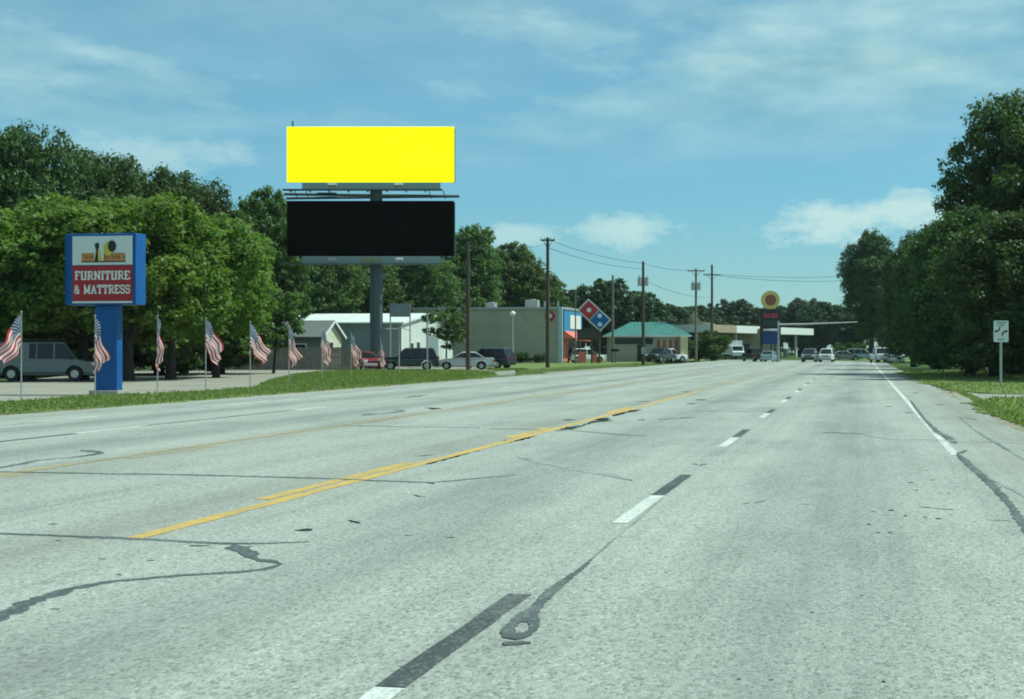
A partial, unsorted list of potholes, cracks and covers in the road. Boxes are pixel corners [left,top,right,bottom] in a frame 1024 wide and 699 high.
crack [504,409,641,480]
